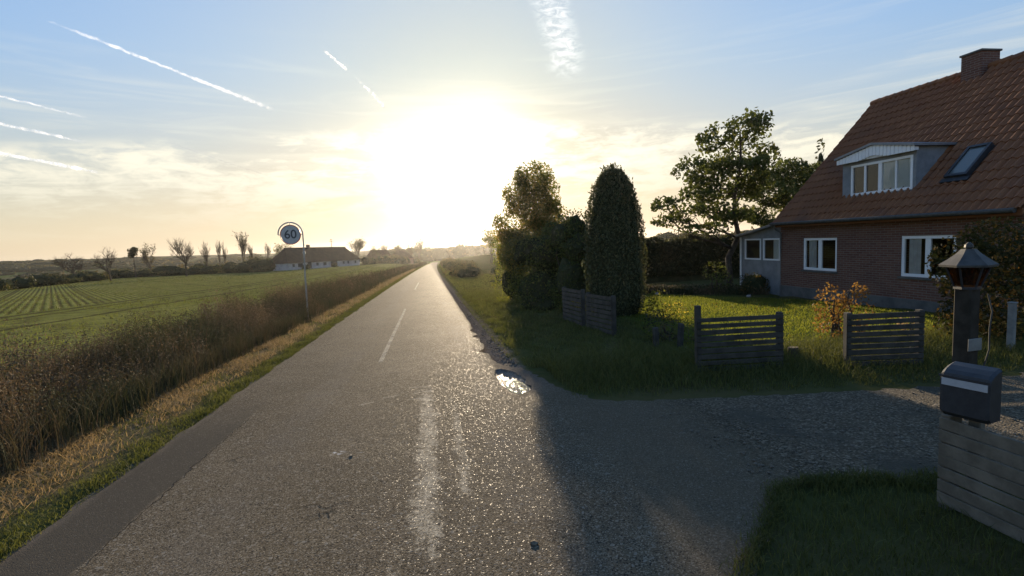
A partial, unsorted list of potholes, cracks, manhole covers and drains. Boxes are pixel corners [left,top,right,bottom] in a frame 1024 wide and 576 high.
pothole [495,369,532,394]
